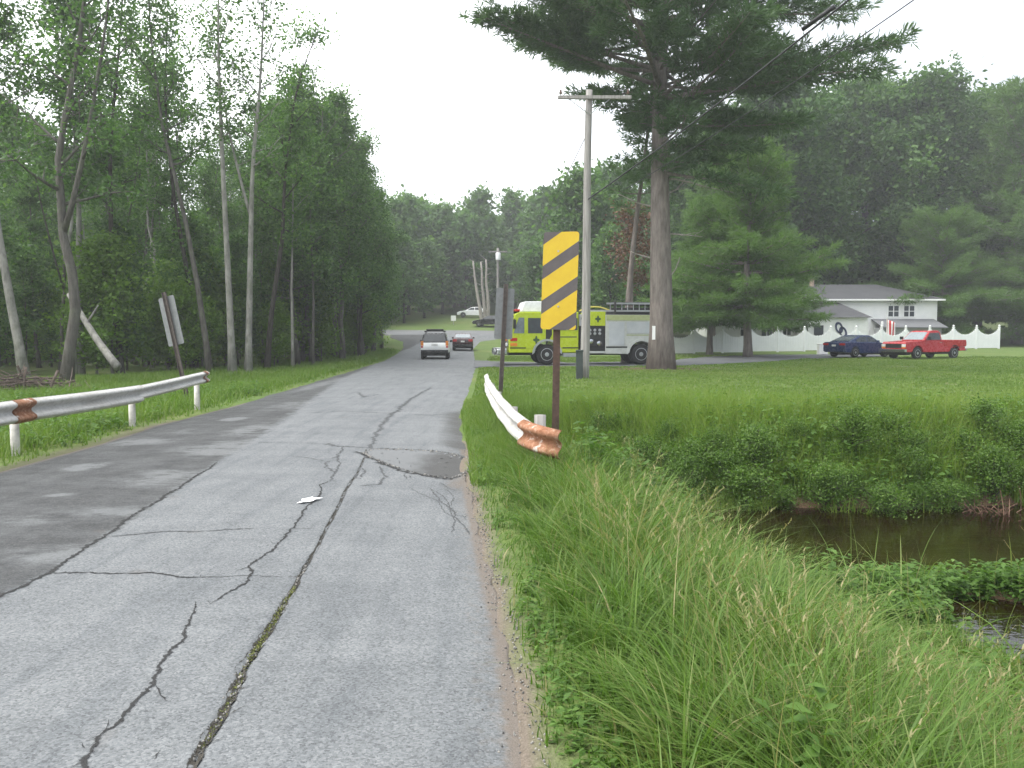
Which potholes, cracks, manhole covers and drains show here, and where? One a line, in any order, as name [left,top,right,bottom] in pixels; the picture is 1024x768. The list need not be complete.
crack [59,388,470,768]
